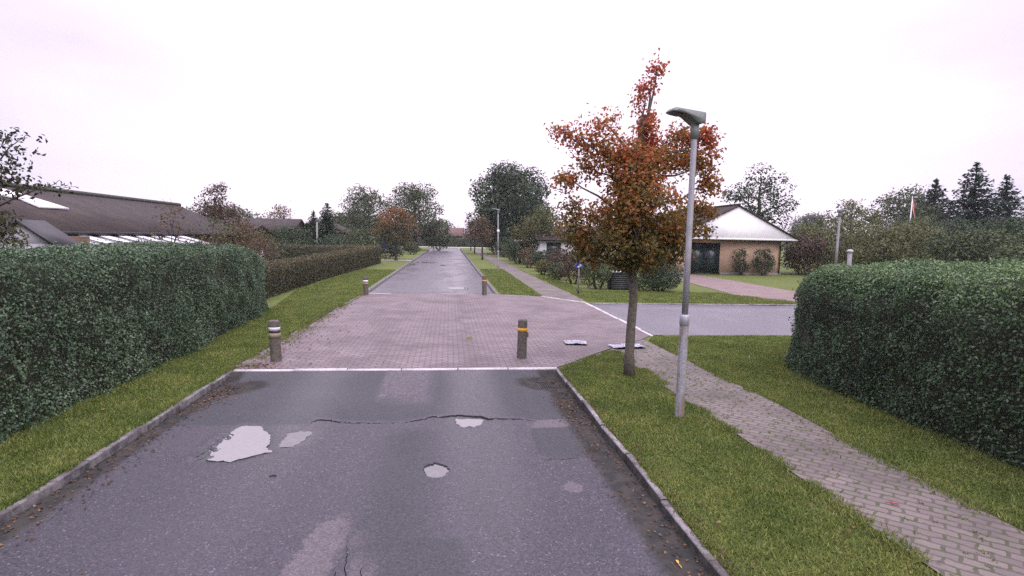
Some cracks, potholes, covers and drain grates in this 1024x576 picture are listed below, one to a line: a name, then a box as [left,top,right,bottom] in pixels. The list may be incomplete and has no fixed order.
crack [306,415,537,426]
pothole [423,462,450,478]
